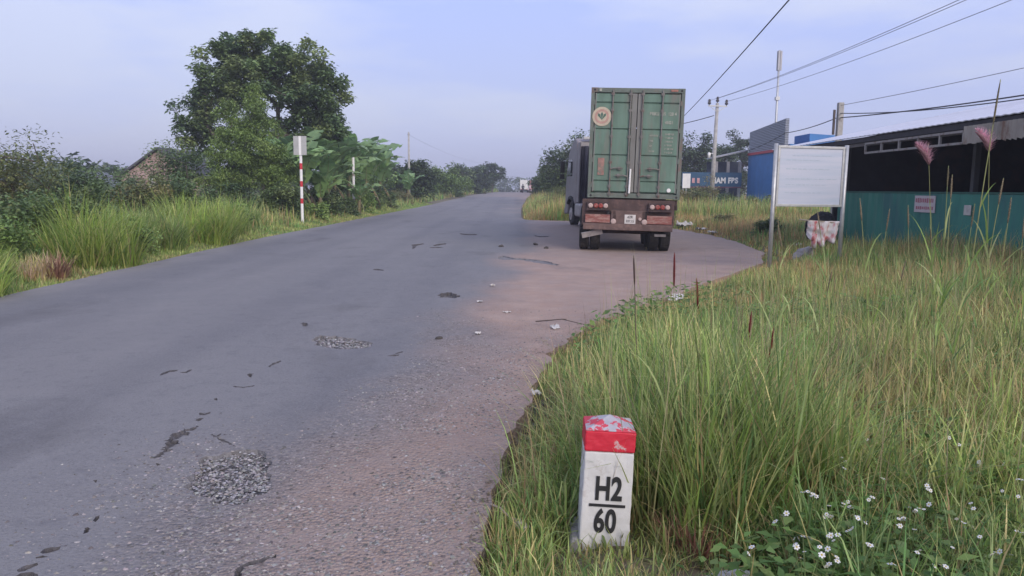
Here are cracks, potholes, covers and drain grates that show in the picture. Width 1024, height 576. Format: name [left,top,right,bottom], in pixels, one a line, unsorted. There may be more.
pothole [184,449,272,505]
crack [17,515,100,576]
crack [234,555,276,576]
crack [412,233,477,249]
crack [154,385,254,466]
pothole [311,335,373,349]
